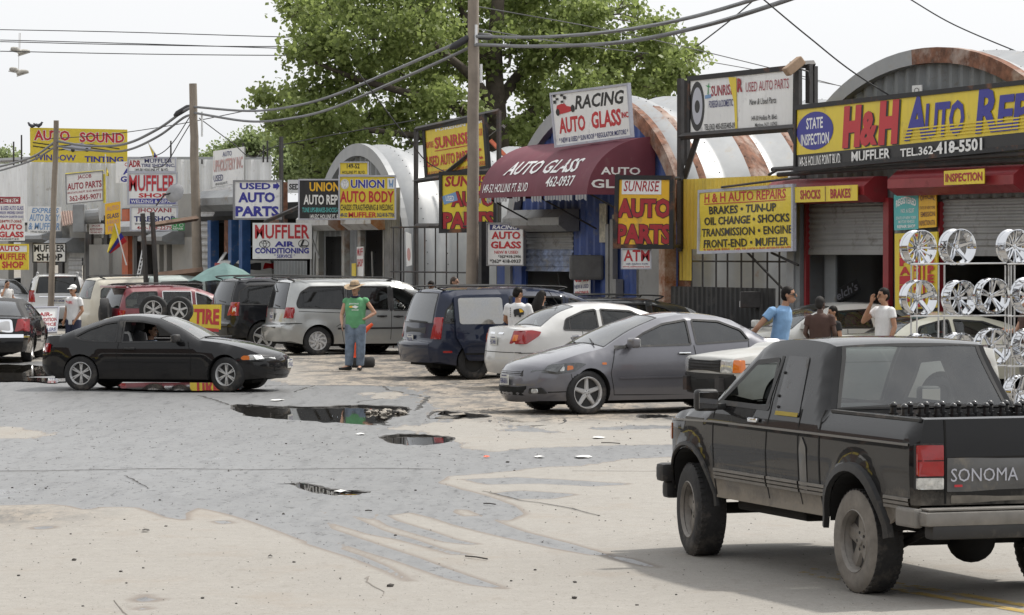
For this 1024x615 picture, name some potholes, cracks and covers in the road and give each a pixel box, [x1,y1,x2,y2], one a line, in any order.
pothole [360,433,472,447]
pothole [412,410,506,421]
crack [482,491,600,516]
pothole [215,404,443,426]
crack [365,576,385,596]
pothole [270,483,391,499]
